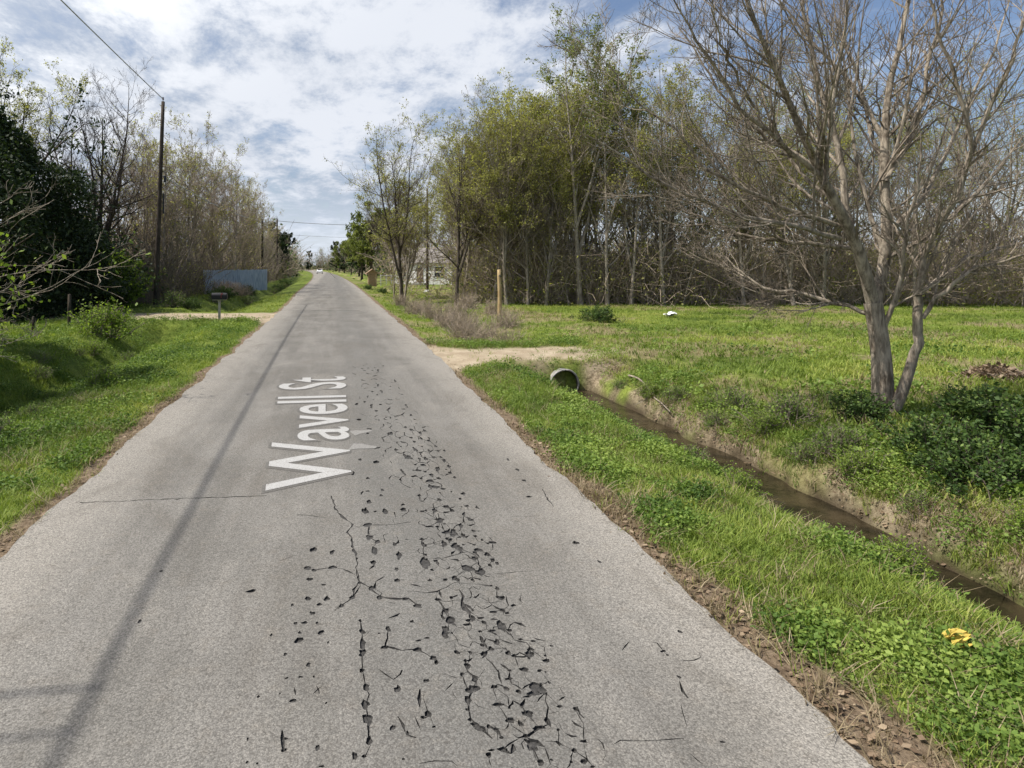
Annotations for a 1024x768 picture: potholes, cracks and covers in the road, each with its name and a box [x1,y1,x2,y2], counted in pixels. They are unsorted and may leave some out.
crack [283,365,605,768]
crack [280,730,289,752]
crack [614,681,703,764]
